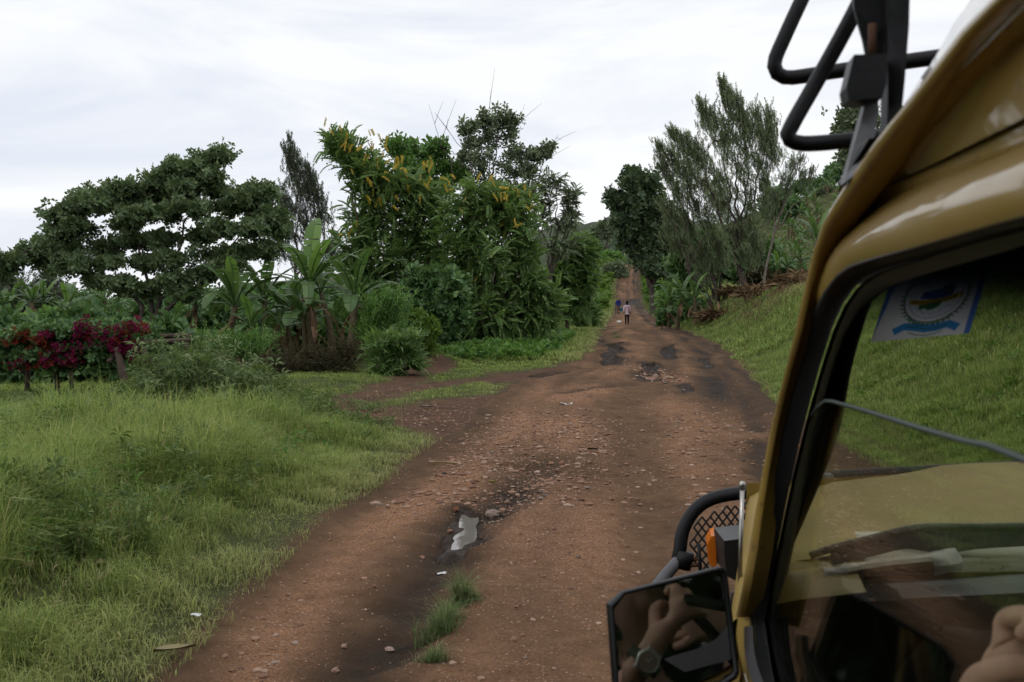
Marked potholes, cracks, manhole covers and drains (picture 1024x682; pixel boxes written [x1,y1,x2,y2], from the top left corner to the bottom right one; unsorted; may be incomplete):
pothole [641,362,661,381]
pothole [661,345,677,359]
pothole [436,507,484,566]
pothole [600,343,626,366]
